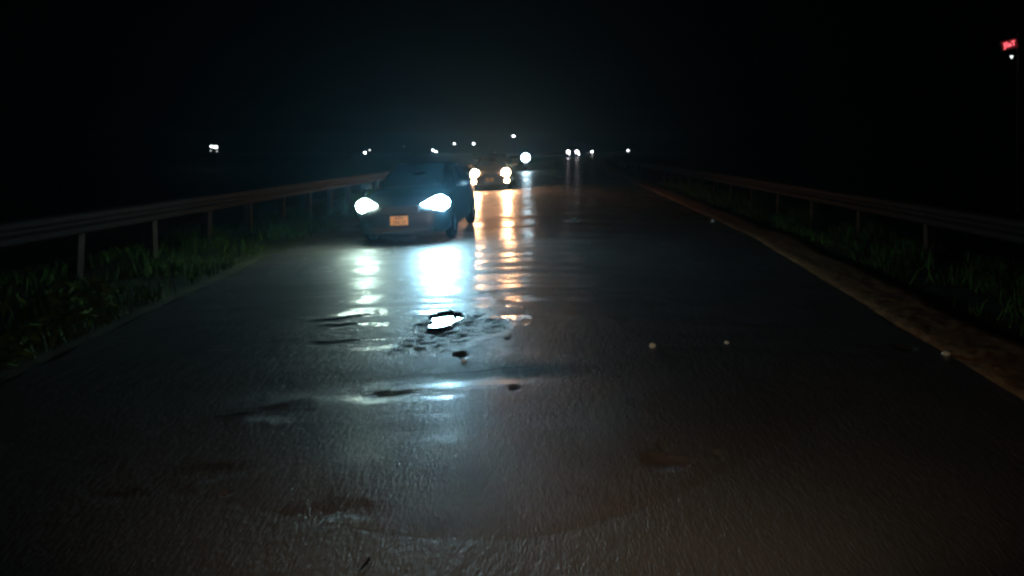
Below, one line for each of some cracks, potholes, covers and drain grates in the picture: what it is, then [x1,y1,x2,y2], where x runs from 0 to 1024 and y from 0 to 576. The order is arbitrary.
pothole [357,390,421,404]
pothole [387,313,514,357]
